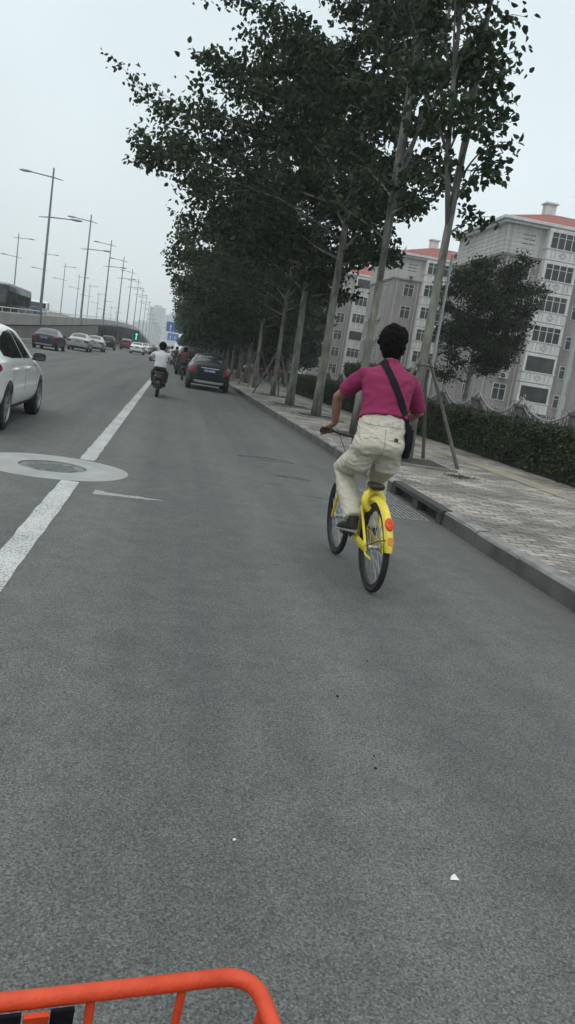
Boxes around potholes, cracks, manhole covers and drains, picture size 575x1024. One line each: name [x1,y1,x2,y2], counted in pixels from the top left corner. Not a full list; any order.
drain grate [358,481,453,525]
manhole cover [0,452,128,482]
